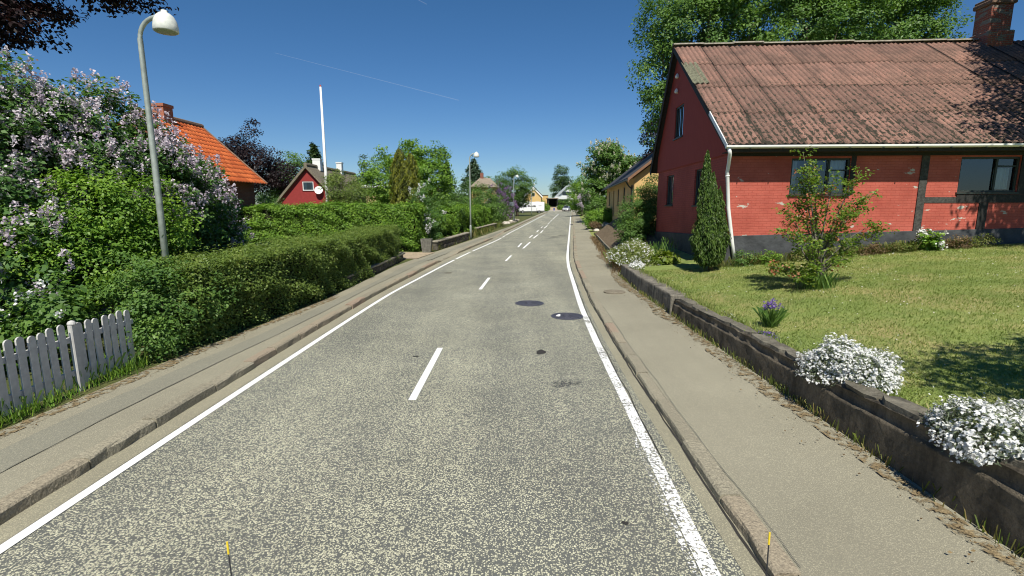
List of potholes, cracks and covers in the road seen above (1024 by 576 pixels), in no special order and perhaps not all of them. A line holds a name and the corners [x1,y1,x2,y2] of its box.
manhole cover [551,312,583,320]
